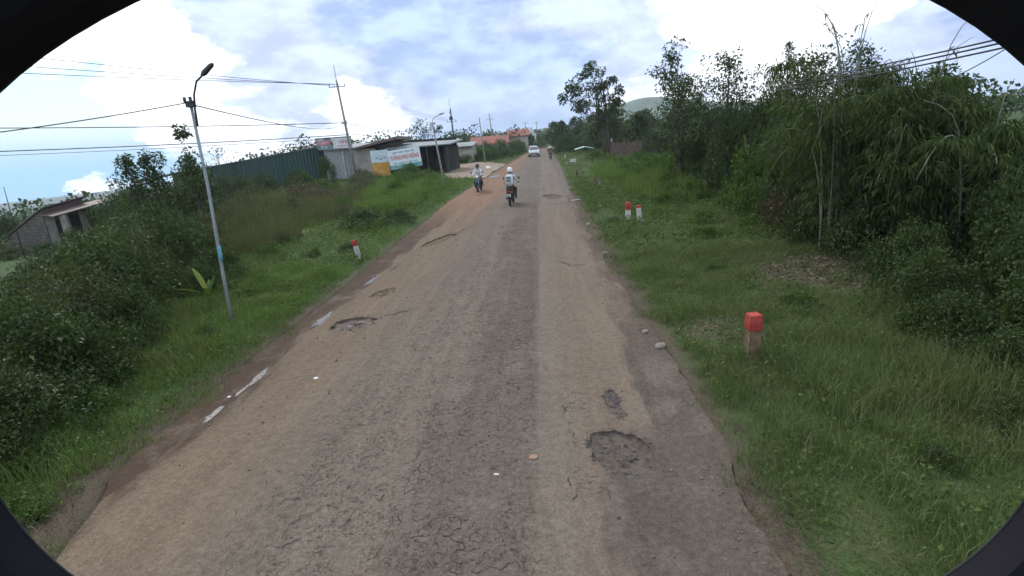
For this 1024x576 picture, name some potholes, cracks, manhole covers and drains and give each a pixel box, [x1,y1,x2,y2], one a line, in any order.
pothole [420,232,460,248]
crack [562,392,610,503]
crack [385,368,534,575]
pothole [584,428,656,475]
pothole [329,315,382,333]
pothole [369,287,398,298]
pothole [601,387,628,420]
crack [235,383,421,548]
